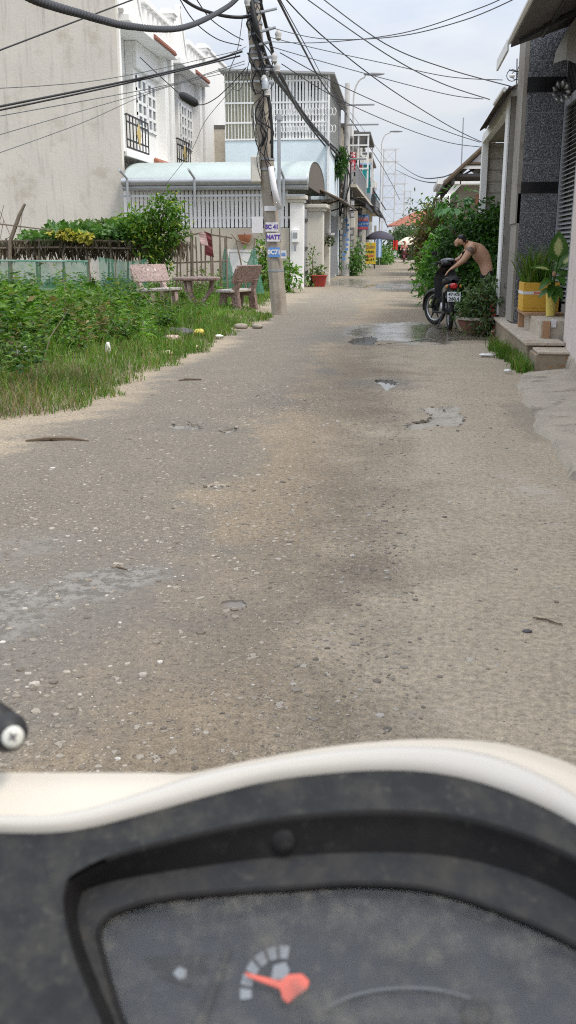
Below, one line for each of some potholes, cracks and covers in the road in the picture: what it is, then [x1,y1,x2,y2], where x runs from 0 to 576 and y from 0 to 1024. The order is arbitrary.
pothole [348,336,377,346]
pothole [404,405,466,430]
pothole [375,379,399,391]
pothole [166,421,203,430]
pothole [220,600,247,611]
